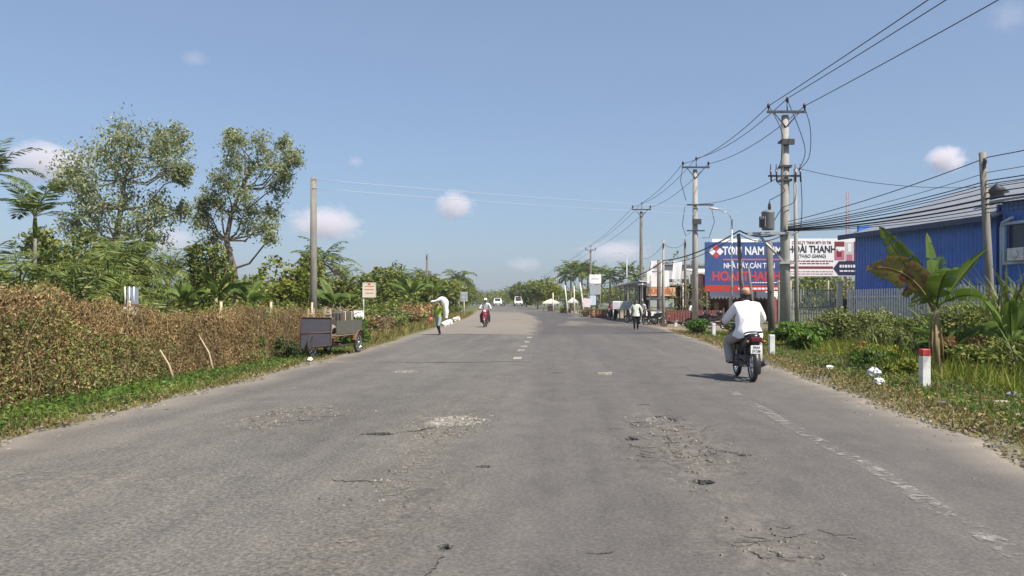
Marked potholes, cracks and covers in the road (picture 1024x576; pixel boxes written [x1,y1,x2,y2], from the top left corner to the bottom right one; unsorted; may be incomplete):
crack [731,526,856,566]
crack [425,548,446,576]
crack [614,404,747,472]
pothole [676,477,727,489]
pothole [416,415,498,427]
